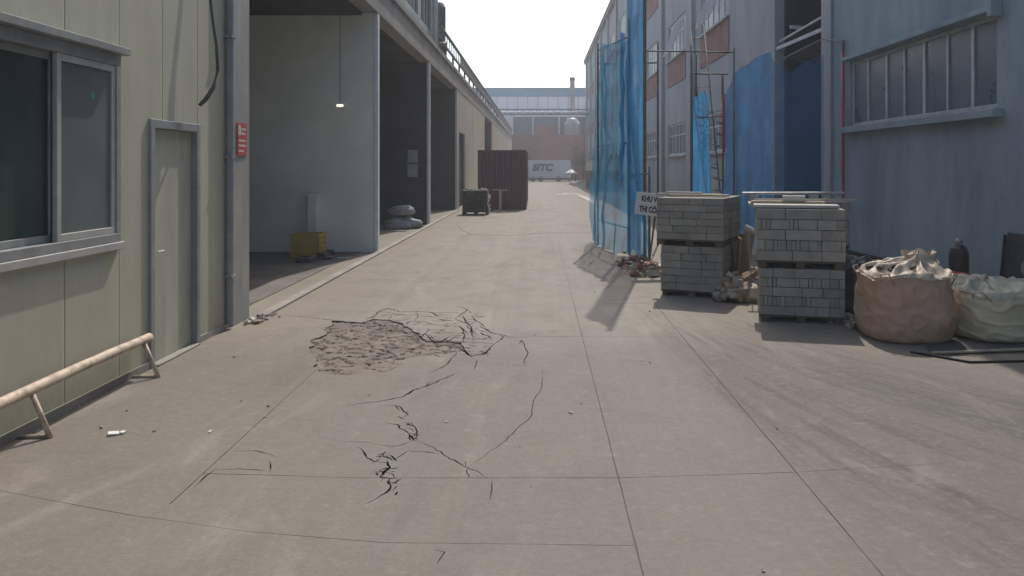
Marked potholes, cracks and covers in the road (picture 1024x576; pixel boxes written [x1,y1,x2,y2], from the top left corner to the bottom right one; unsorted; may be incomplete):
pothole [309,319,464,375]
crack [299,307,546,504]
